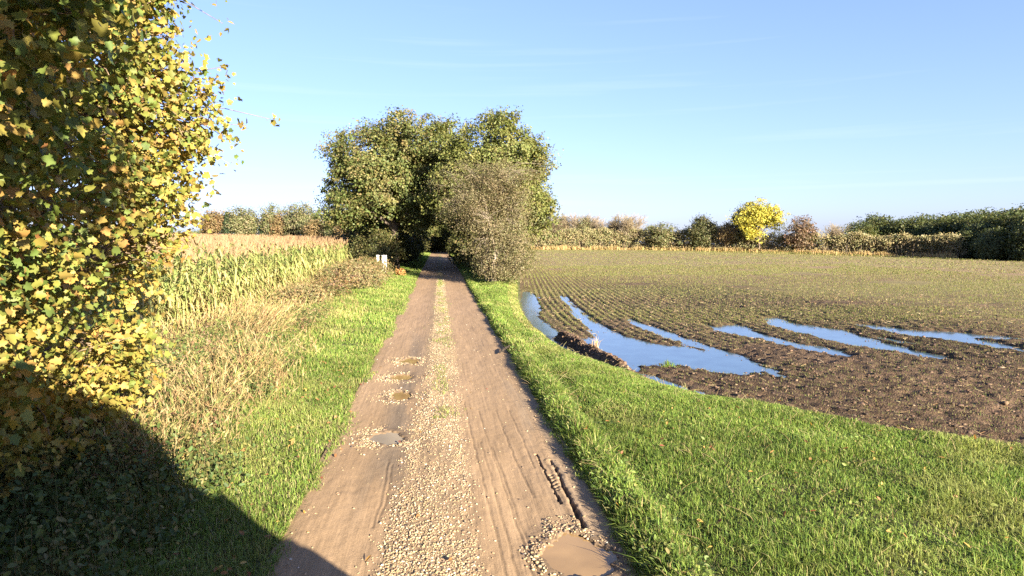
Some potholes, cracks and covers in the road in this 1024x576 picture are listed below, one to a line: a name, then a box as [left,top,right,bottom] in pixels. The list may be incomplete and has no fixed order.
pothole [344,423,428,455]
pothole [384,356,431,366]
pothole [518,514,634,576]
pothole [373,371,430,385]
pothole [368,387,425,406]
